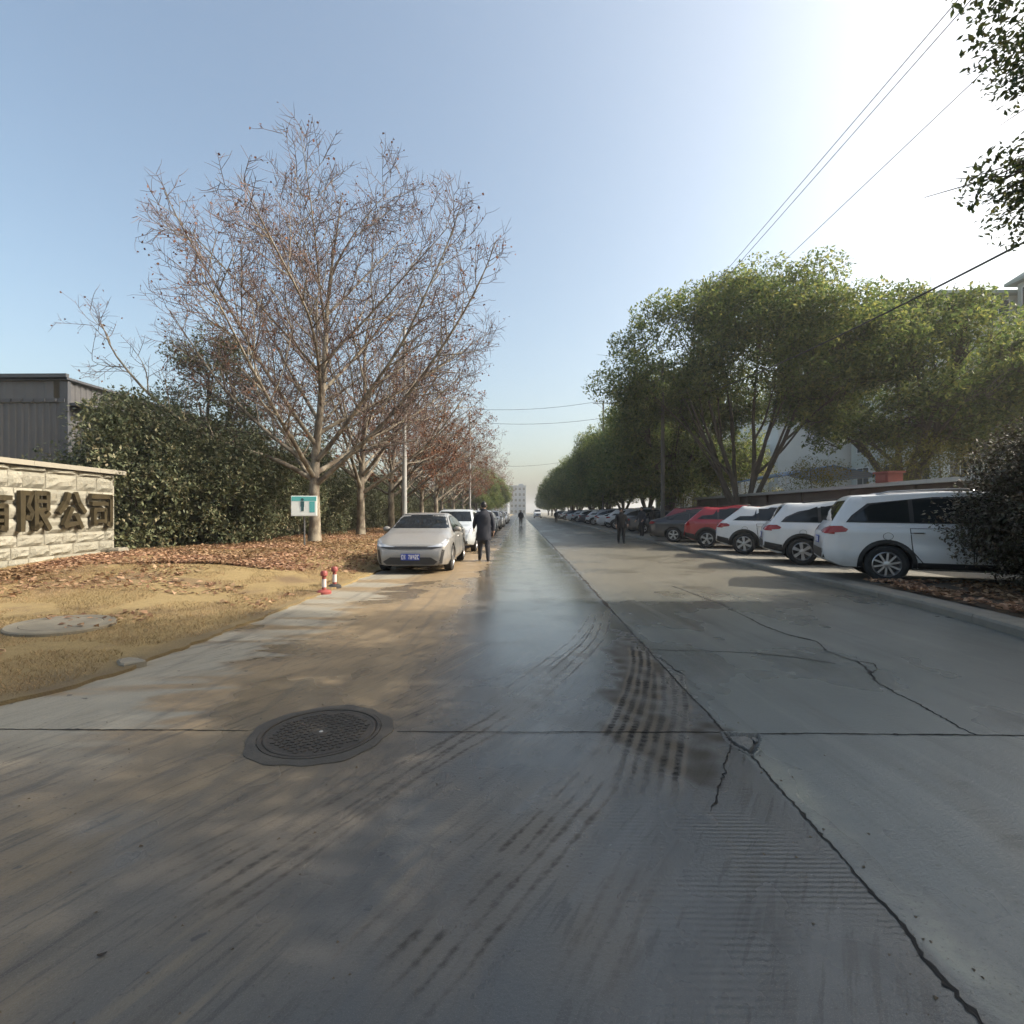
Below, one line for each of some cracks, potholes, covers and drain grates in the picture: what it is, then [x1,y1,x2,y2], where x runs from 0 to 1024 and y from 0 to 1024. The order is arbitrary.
manhole cover [243,705,393,767]
crack [533,525,984,1024]
manhole cover [0,615,117,637]
